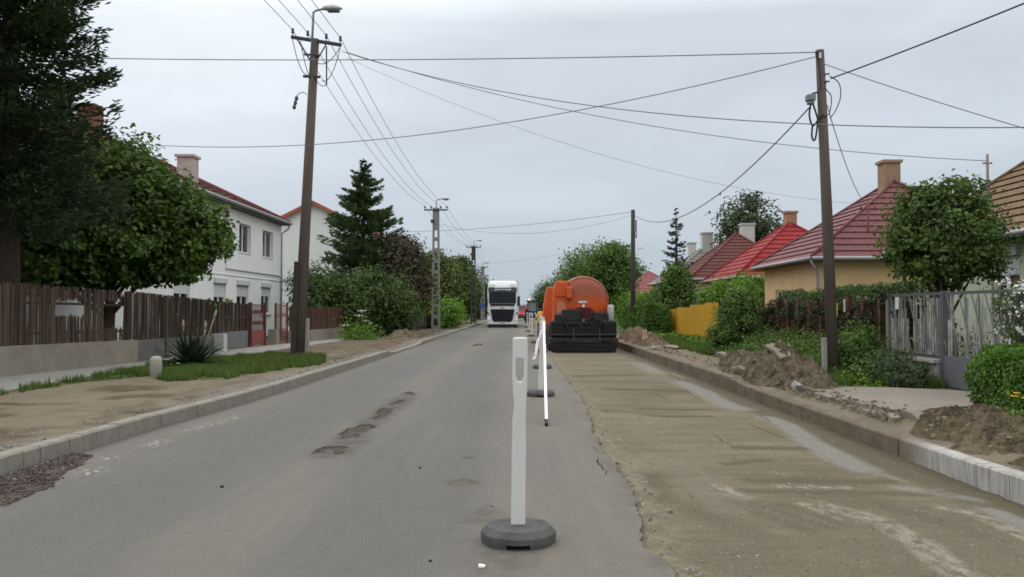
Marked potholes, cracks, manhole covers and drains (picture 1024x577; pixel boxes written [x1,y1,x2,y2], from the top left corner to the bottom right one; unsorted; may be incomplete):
pothole [371,408,394,420]
pothole [338,424,377,439]
pothole [310,446,347,455]
pothole [447,478,481,487]
